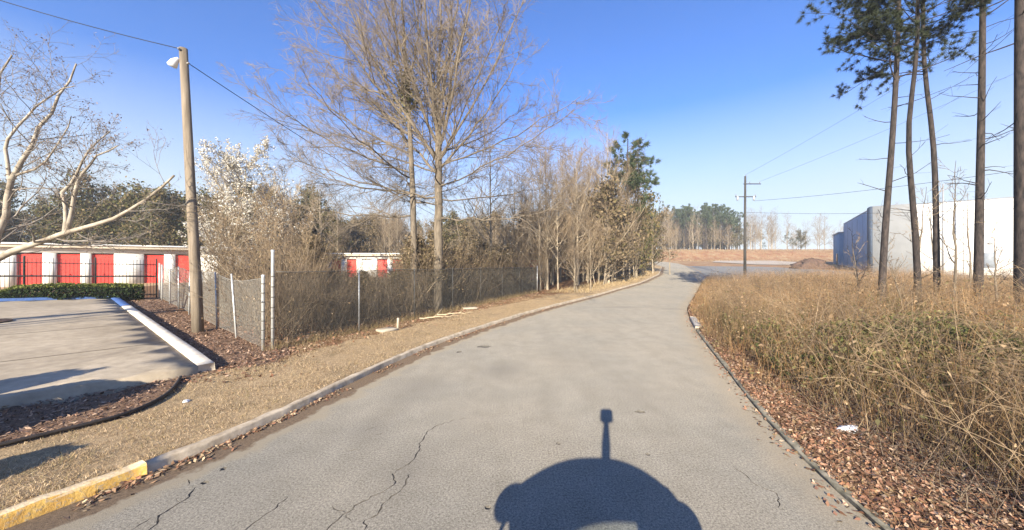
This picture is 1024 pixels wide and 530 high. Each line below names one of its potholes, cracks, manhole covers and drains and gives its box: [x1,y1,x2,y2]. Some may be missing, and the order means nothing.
crack [135,479,196,530]
crack [326,418,463,530]
